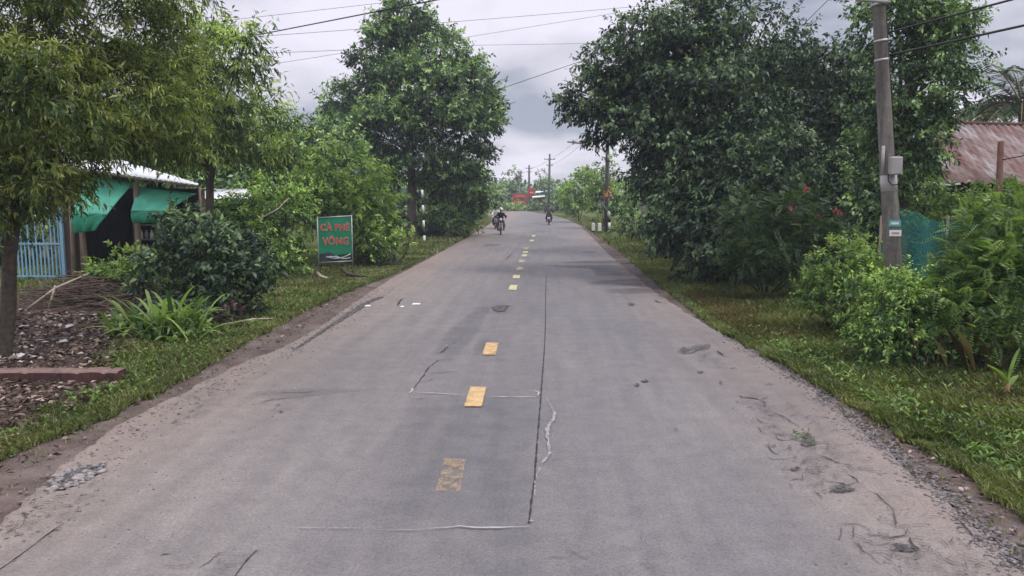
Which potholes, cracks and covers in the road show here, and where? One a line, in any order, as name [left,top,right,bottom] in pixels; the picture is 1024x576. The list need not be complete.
crack [0,479,106,569]
crack [738,383,1022,576]
crack [111,533,264,576]
crack [414,342,455,399]
pothole [47,462,107,490]
